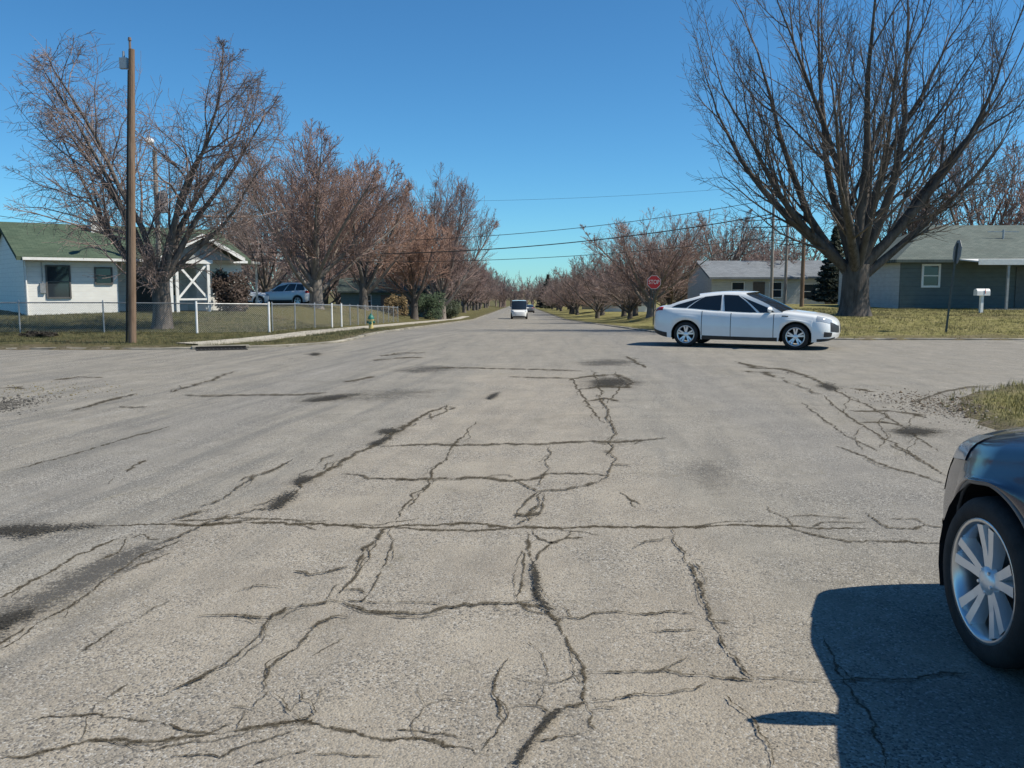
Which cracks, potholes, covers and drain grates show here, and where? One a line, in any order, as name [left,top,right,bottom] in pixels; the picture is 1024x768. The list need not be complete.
crack [347,352,425,382]
crack [0,357,968,768]
